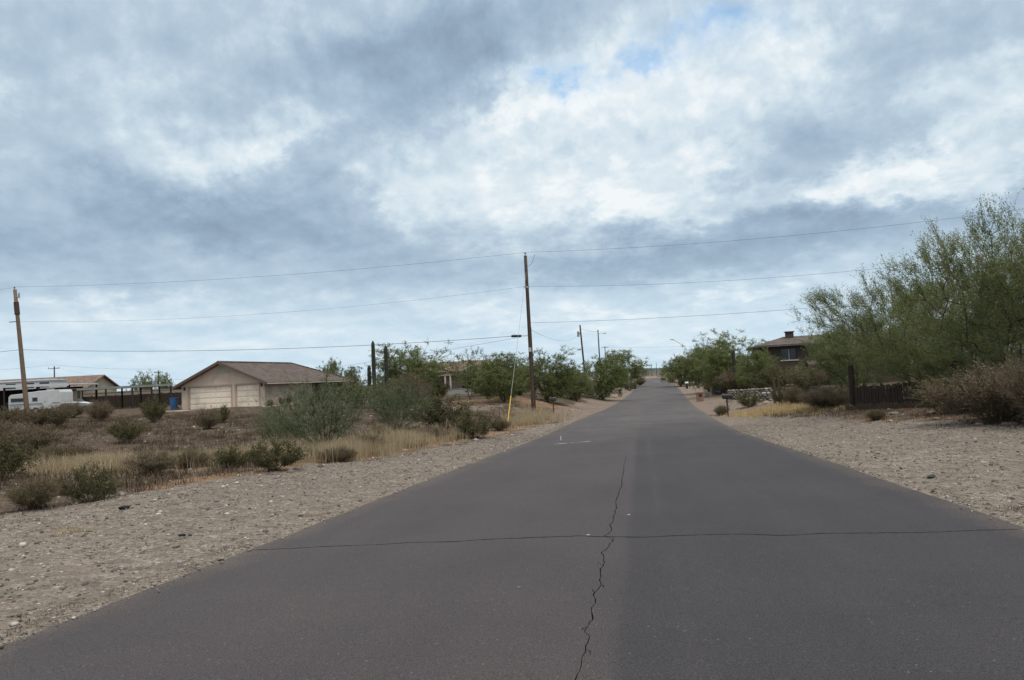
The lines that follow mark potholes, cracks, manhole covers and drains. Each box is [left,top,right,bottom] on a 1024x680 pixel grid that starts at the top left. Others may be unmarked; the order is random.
crack [263,465,1018,680]
